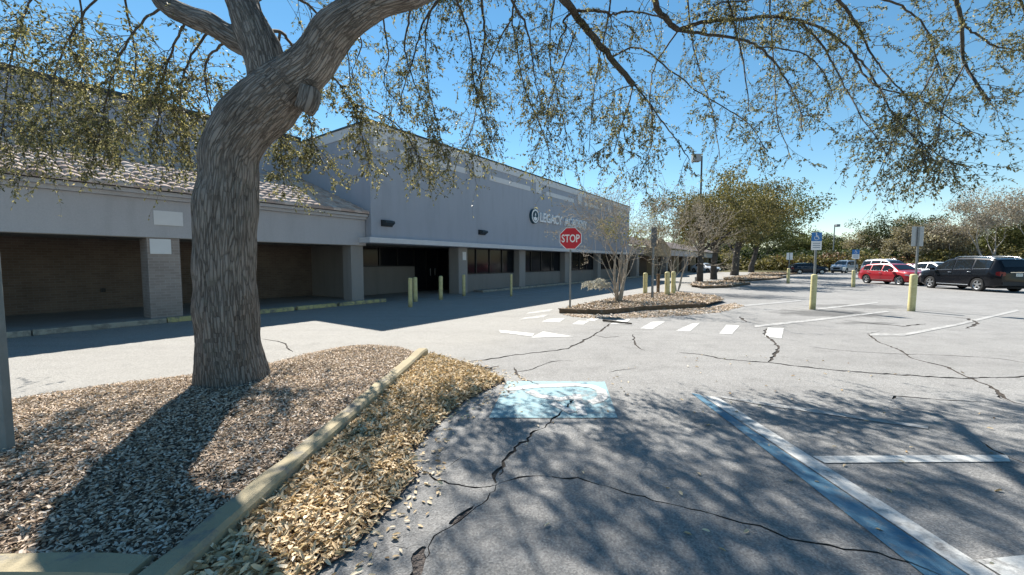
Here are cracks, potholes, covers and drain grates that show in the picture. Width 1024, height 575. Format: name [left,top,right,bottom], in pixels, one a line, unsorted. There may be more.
crack [468,324,643,383]
crack [679,314,1024,410]
crack [376,400,912,564]
